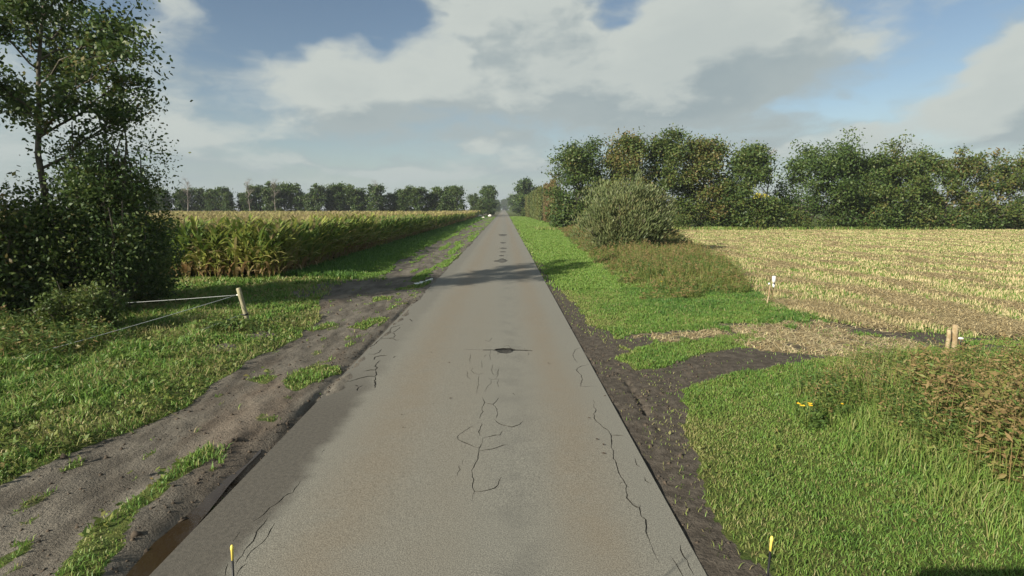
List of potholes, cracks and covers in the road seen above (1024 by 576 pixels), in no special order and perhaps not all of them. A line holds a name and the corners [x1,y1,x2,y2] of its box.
crack [573,351,659,562]
crack [225,482,300,576]
crack [352,319,412,391]
crack [457,338,529,498]
